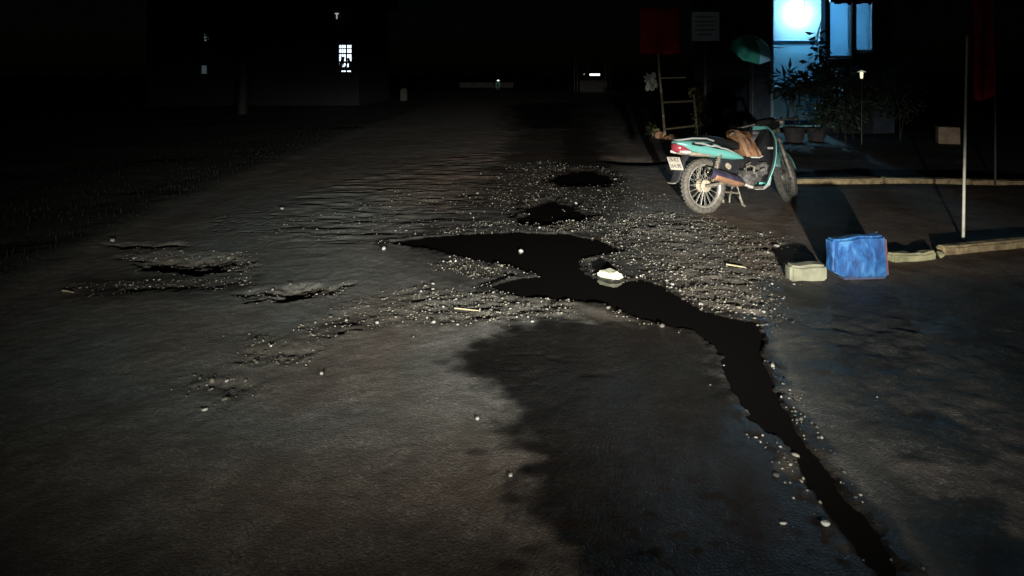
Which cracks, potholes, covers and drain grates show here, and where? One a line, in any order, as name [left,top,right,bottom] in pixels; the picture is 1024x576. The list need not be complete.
pothole [379,231,628,278]
pothole [107,250,263,277]
pothole [181,376,263,403]
pothole [507,196,603,227]
pothole [226,339,326,368]
pothole [534,166,628,189]
pothole [92,240,197,250]
pothole [226,279,360,304]
